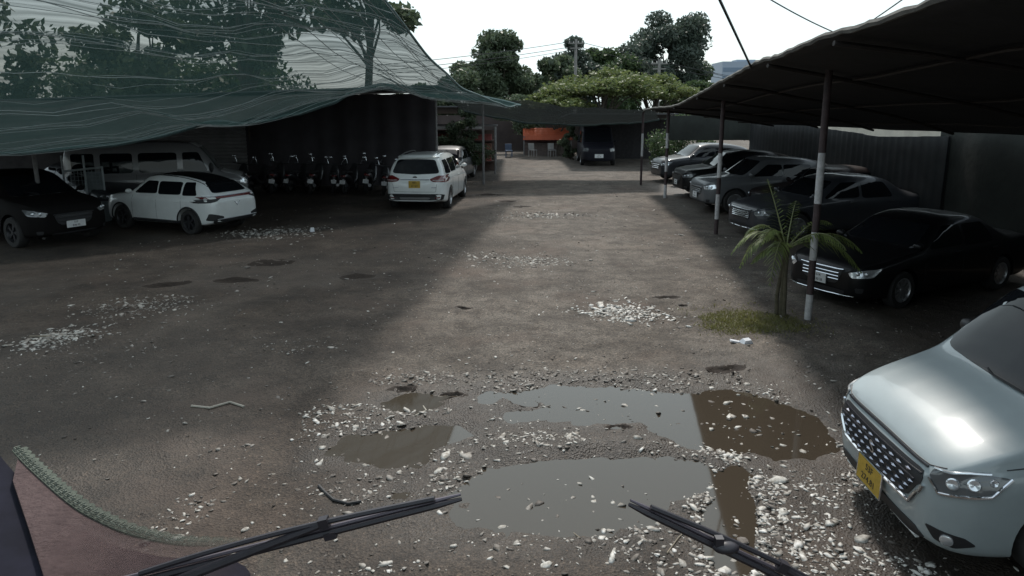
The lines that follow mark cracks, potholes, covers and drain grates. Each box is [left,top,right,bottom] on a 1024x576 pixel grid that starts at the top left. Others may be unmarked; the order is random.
pothole [439,391,469,400]
pothole [705,364,746,374]
pothole [386,385,418,393]
